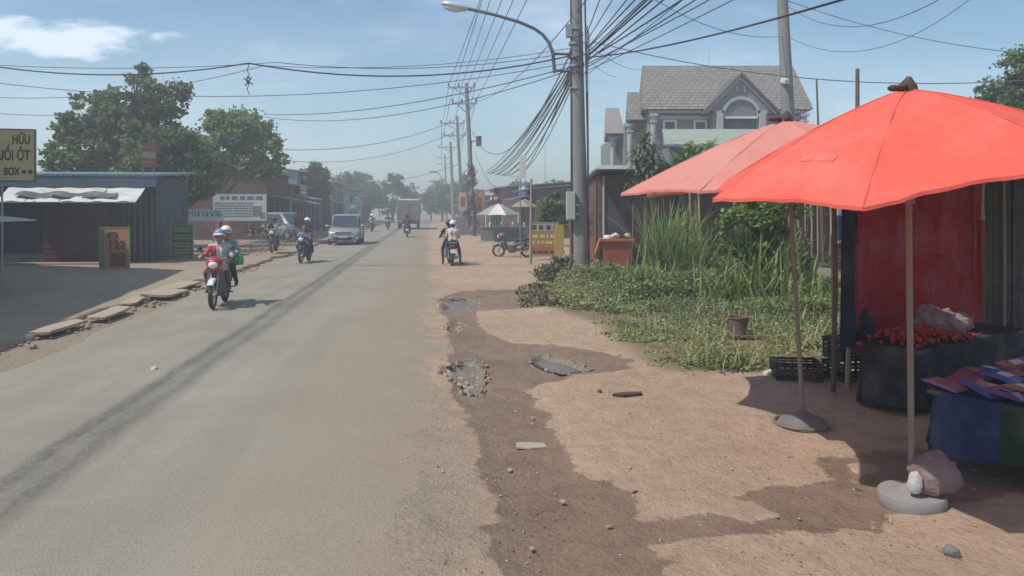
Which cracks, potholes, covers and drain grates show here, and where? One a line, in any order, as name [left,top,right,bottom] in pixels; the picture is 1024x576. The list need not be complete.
pothole [528,353,594,377]
pothole [432,358,492,397]
pothole [432,297,483,311]
